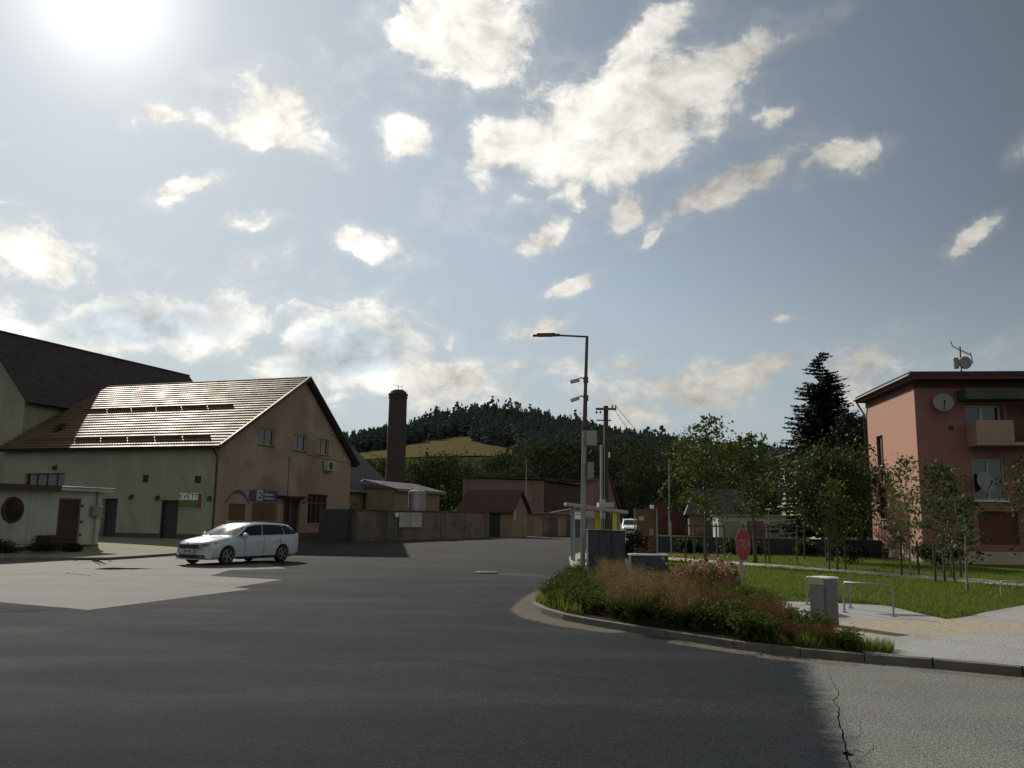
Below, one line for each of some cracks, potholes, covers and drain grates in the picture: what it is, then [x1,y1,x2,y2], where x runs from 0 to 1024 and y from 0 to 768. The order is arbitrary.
crack [829,674,880,768]
